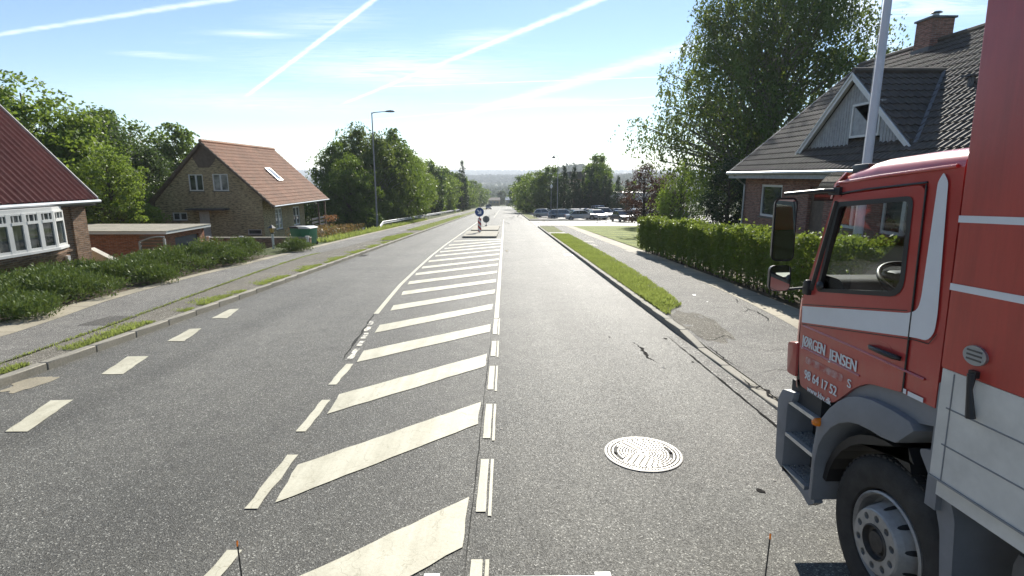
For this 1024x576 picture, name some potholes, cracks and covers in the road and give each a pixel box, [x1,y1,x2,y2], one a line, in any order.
manhole cover [604,437,683,473]
